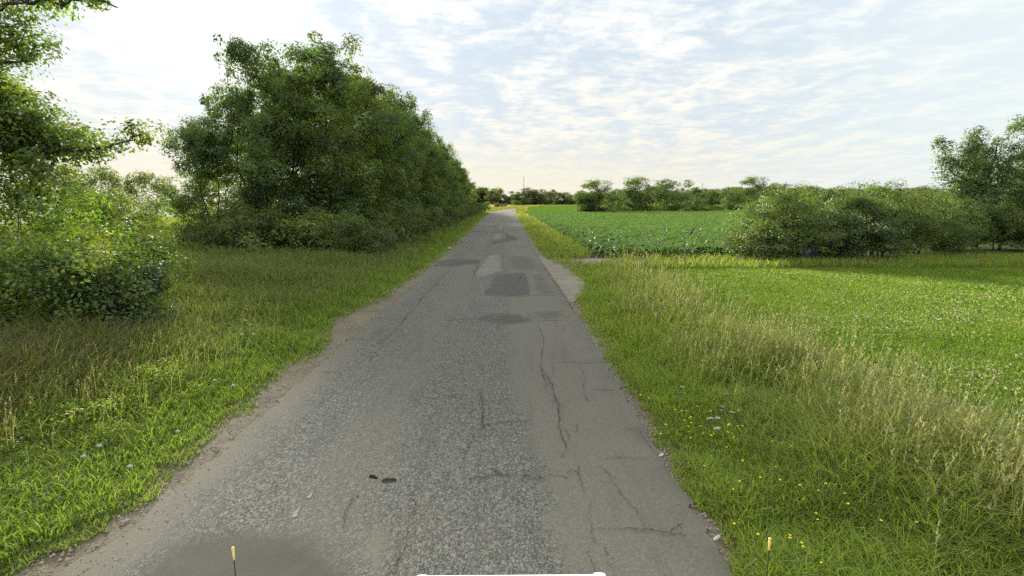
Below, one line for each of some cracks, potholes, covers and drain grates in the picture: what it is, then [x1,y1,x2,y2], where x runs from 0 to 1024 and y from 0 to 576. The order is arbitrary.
crack [443,328,686,573]
